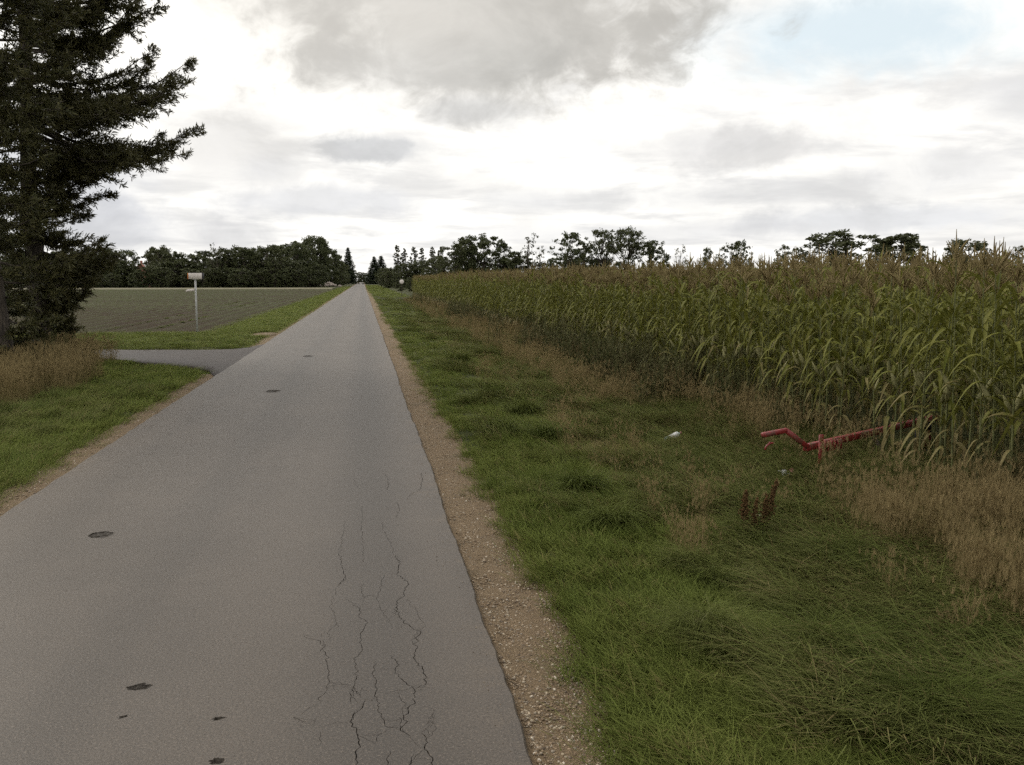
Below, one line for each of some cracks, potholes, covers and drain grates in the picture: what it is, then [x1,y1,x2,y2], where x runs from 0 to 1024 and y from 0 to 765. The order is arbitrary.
crack [293,505,437,765]
pothole [126,683,153,691]
